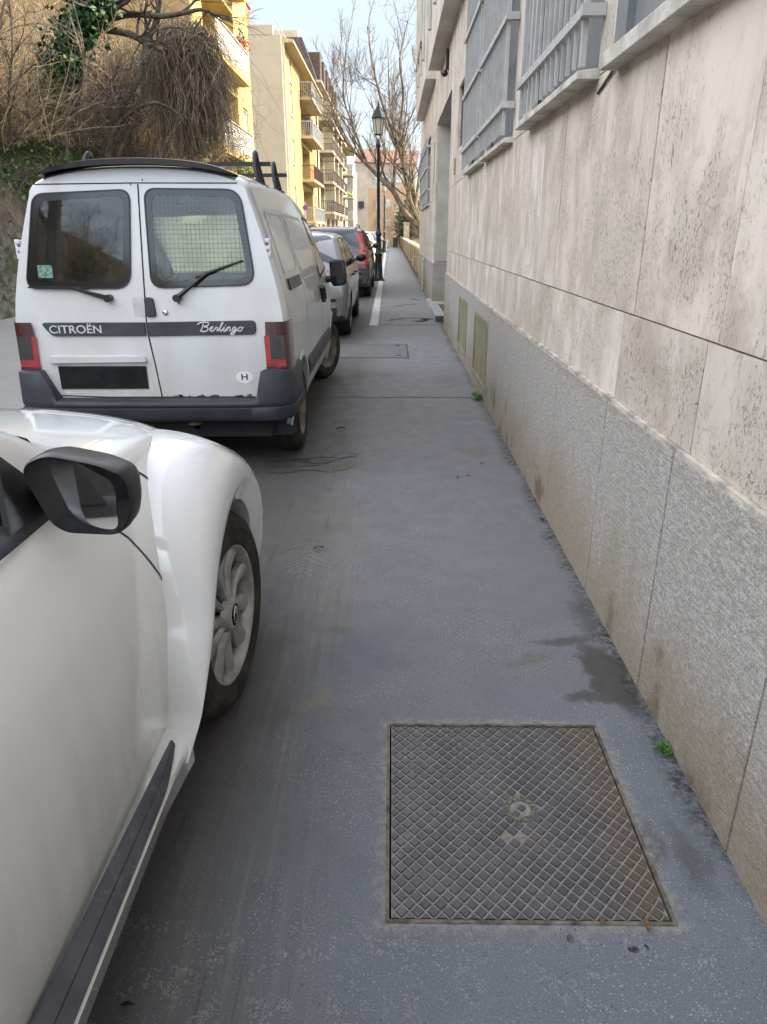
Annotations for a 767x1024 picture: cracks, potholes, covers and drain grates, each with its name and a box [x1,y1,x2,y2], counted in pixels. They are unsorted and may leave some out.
crack [265,452,364,474]
manhole cover [339,344,409,358]
manhole cover [385,723,679,930]
